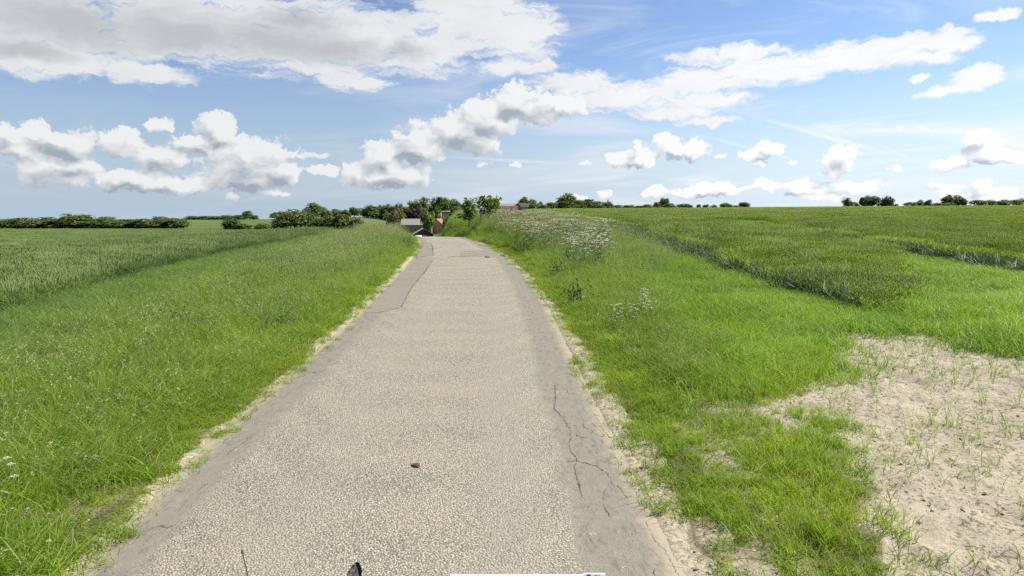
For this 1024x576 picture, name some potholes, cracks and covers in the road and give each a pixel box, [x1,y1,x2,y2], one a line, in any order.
crack [553,380,627,517]
